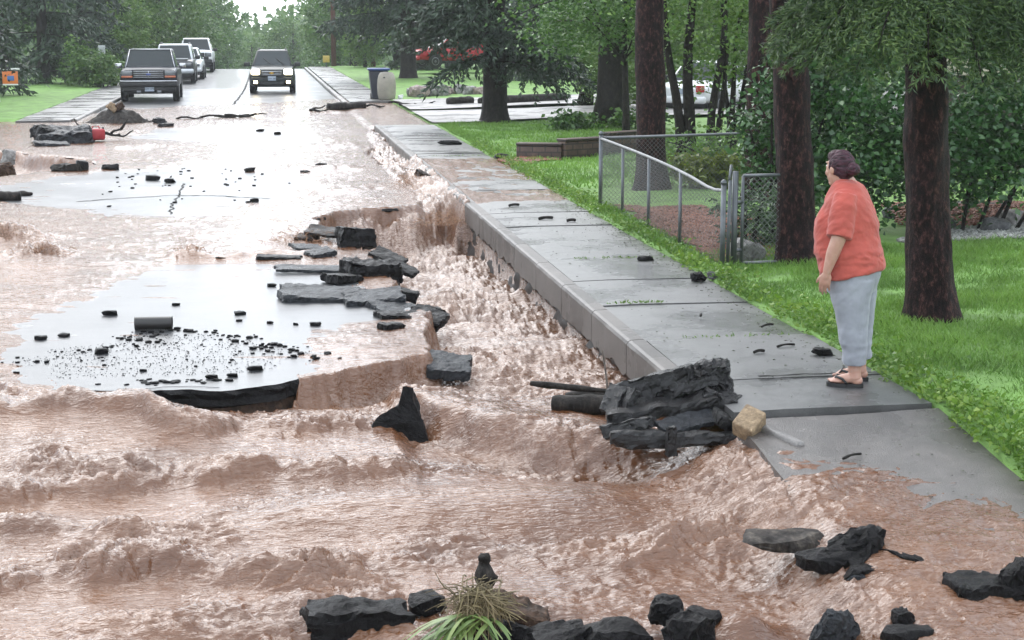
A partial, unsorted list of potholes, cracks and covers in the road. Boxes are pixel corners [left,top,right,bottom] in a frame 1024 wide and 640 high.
pothole [98,208,399,413]
crack [76,183,271,214]
